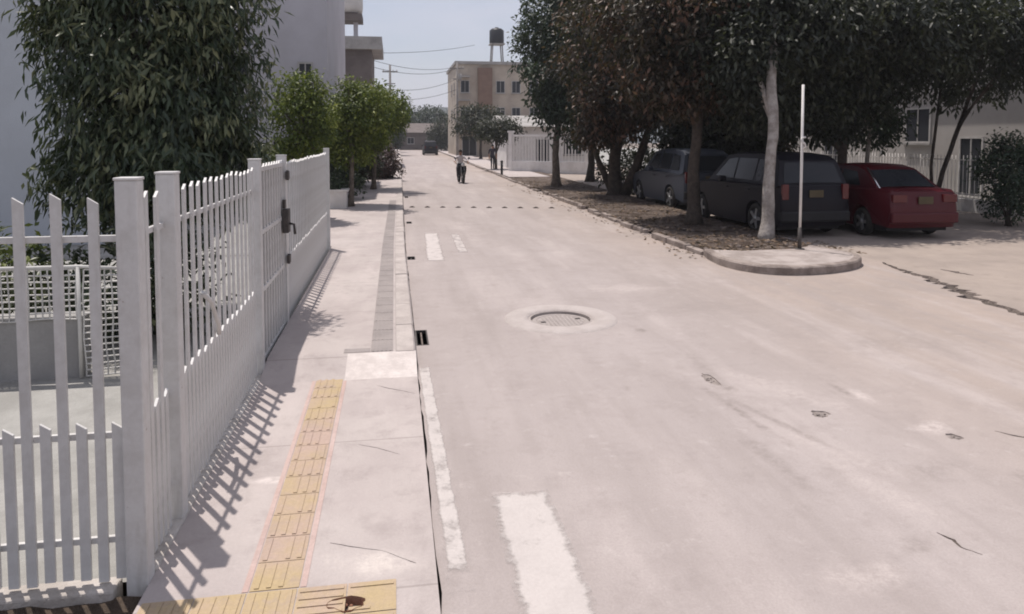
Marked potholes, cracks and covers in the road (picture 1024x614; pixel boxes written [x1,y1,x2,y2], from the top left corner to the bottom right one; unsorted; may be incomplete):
crack [882,262,1024,316]
crack [938,533,983,555]
crack [332,543,415,563]
pothole [701,373,721,385]
manhole cover [504,305,618,334]
